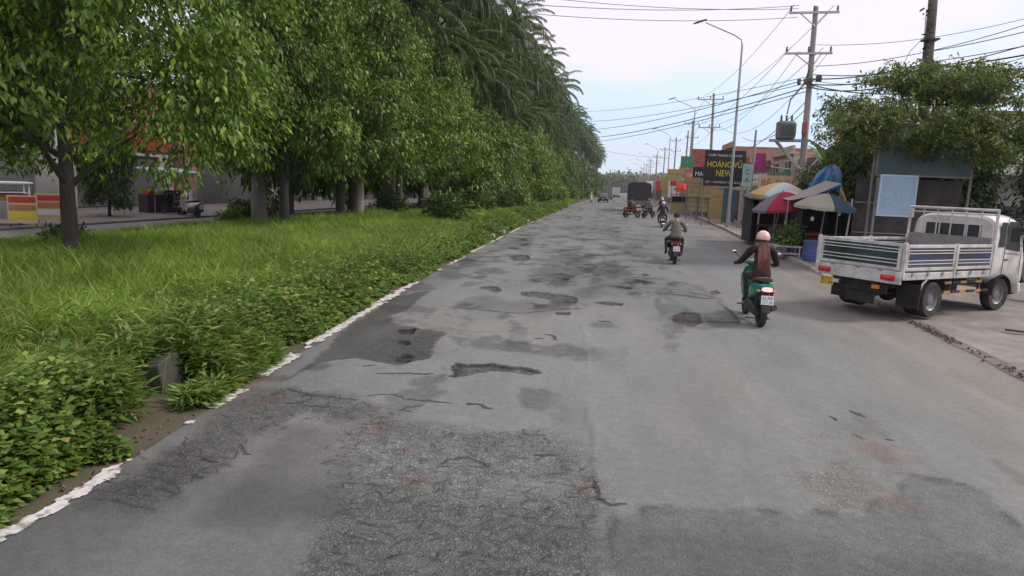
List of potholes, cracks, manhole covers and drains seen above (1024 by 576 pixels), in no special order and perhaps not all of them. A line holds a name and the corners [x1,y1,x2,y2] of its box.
pothole [391,326,422,337]
pothole [391,338,419,348]
pothole [507,254,534,262]
pothole [439,361,550,382]
crack [297,415,628,576]
pothole [386,352,422,365]
pothole [476,285,506,294]
pothole [514,291,582,305]
crack [90,387,449,508]
